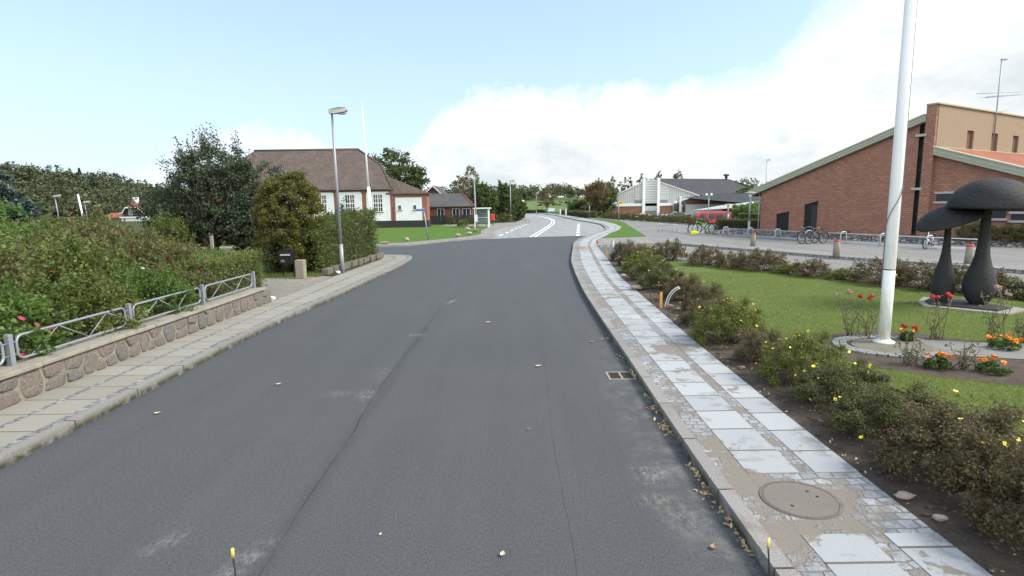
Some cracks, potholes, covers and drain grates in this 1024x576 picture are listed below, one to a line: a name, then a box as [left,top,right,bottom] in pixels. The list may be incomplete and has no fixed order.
manhole cover [759,481,844,520]
drain grate [605,371,637,380]
crack [543,344,577,576]
